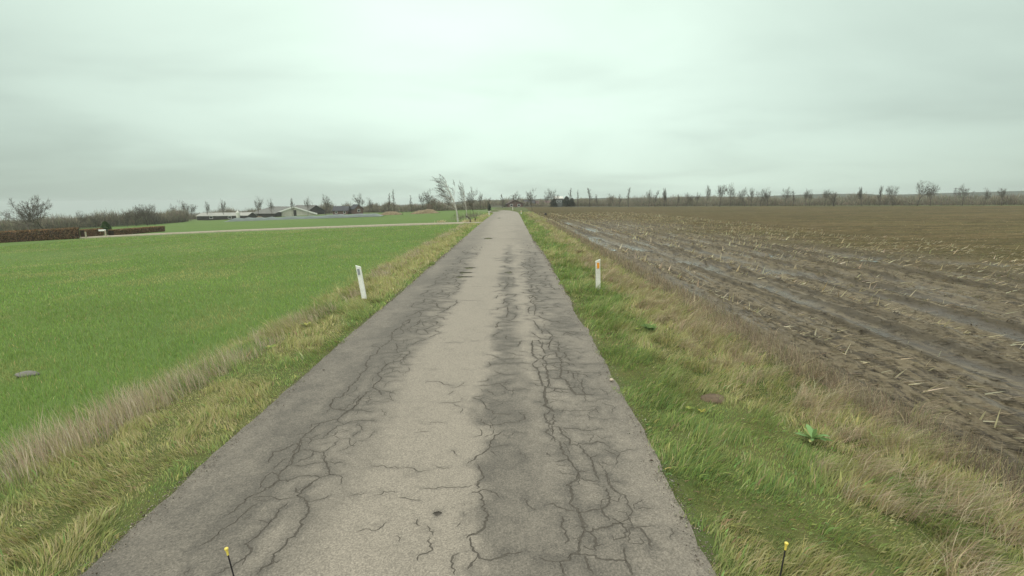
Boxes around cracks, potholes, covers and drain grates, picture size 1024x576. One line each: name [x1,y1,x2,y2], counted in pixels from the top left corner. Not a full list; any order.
crack [184,245,482,575]
crack [350,243,674,575]
